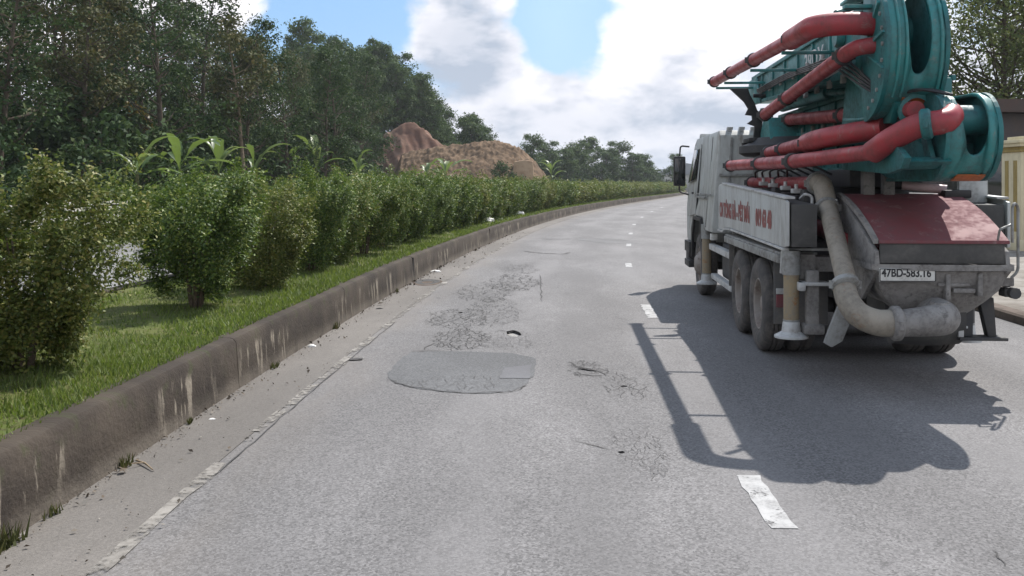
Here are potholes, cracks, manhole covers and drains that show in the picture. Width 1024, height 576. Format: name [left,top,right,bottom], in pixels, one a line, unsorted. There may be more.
crack [578,428,671,481]
crack [415,251,571,351]
crack [567,360,648,400]
